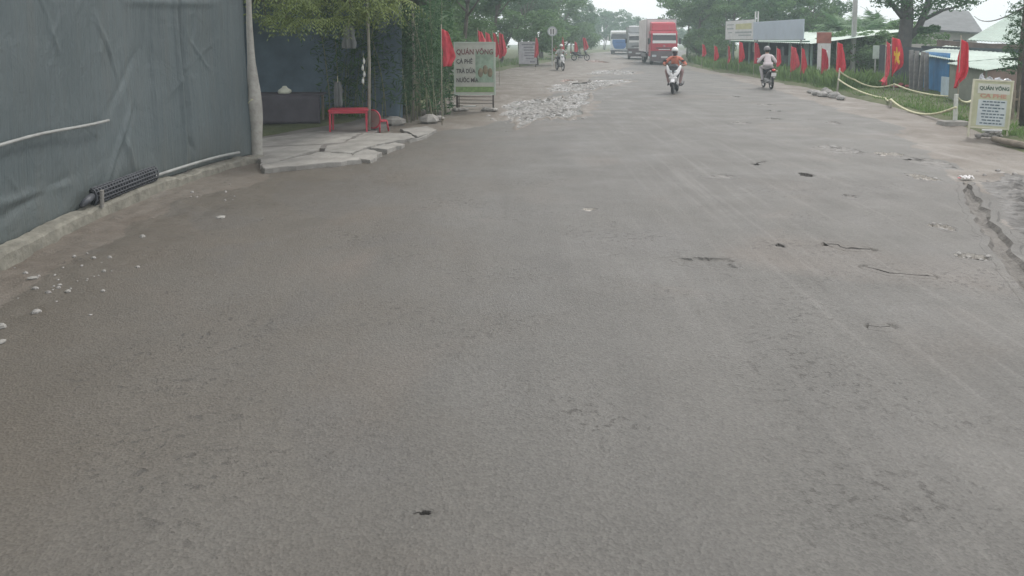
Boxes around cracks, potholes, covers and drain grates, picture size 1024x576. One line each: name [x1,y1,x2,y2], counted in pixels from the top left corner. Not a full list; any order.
pothole [480,86,624,132]
pothole [572,69,643,77]
crack [956,181,1024,306]
crack [824,242,937,280]
pothole [804,144,872,156]
crack [868,322,897,332]
